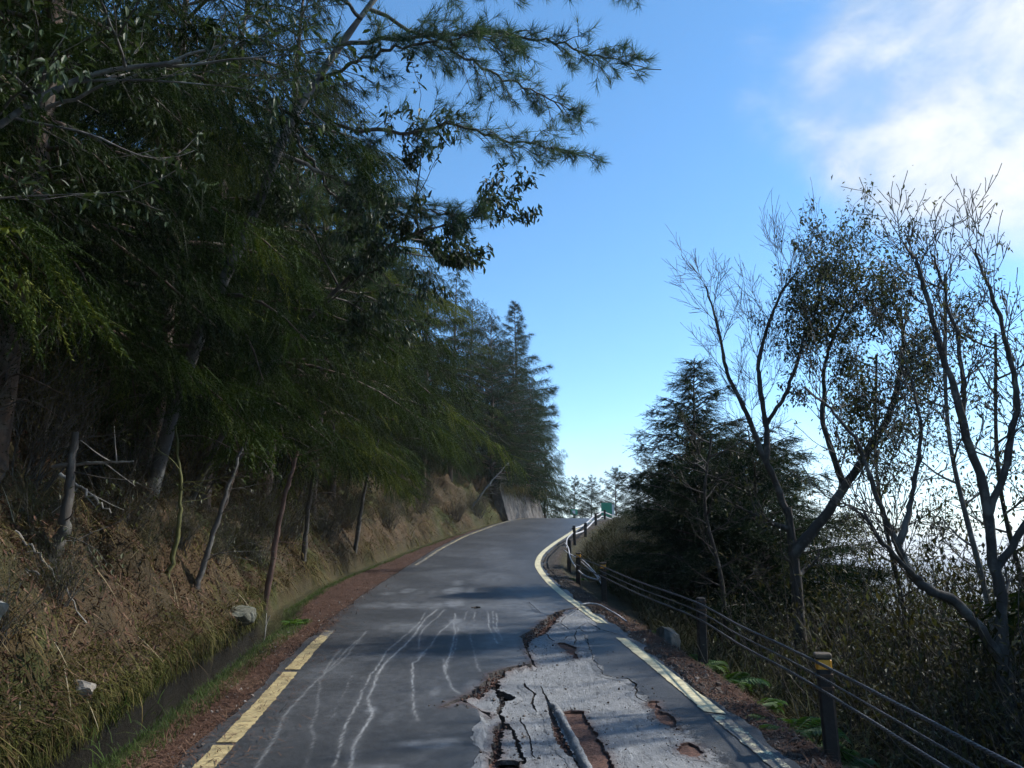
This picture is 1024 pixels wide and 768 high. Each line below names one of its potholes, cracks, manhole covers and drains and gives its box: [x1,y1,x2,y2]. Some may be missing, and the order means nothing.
pothole [547,701,623,768]
pothole [641,699,684,730]
pothole [553,642,583,660]
crack [436,602,651,768]
pothole [668,741,712,762]
